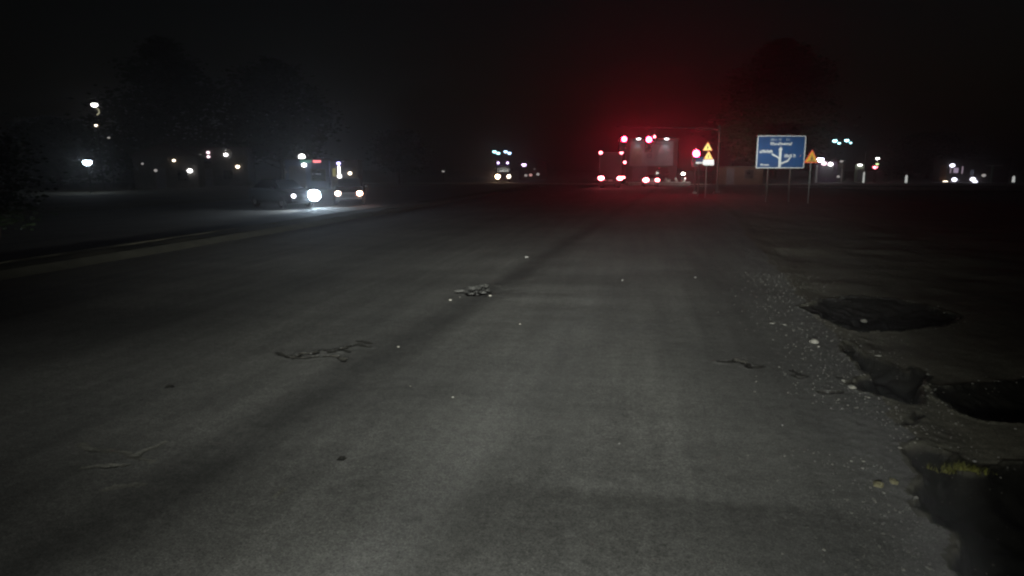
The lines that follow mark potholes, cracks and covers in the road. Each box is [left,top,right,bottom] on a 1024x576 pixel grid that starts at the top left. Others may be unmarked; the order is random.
pothole [926,378,1024,423]
crack [717,359,766,369]
pothole [453,284,492,297]
crack [275,340,376,362]
crack [75,441,168,492]
pothole [897,438,1024,576]
pothole [836,337,934,409]
pothole [796,295,964,333]
